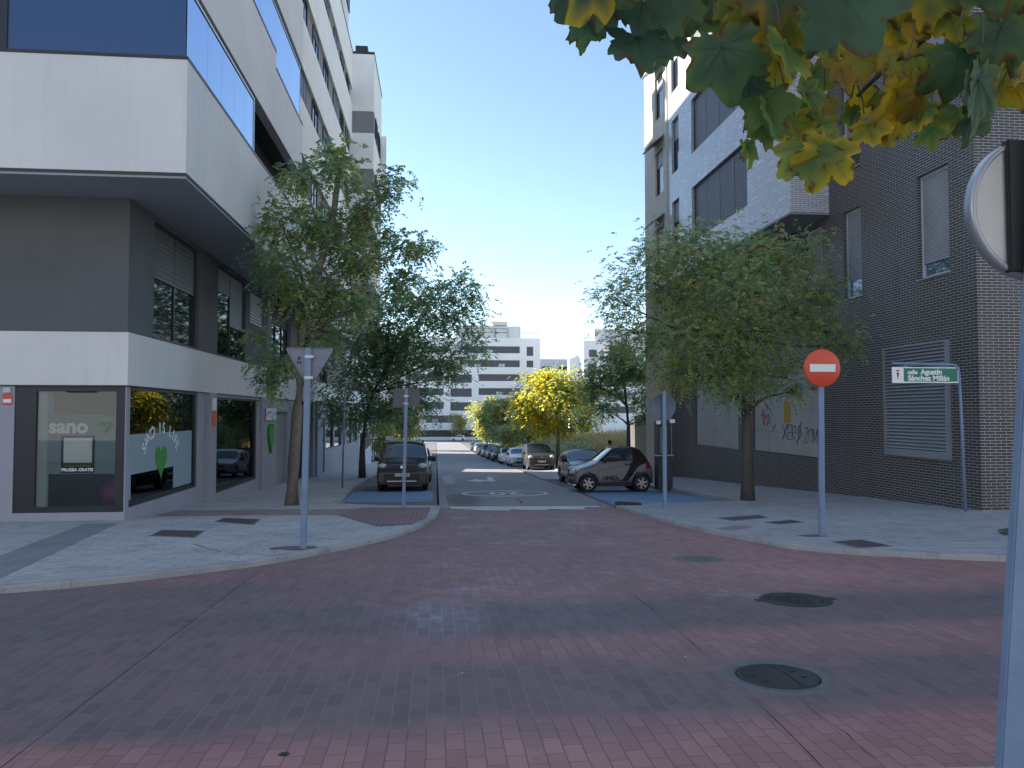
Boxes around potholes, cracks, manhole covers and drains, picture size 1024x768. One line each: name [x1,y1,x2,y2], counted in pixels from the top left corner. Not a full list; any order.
utility cover [831,540,891,548]
crack [762,705,872,761]
manhole cover [722,660,836,695]
manhole cover [673,555,723,563]
manhole cover [754,592,837,608]
utility cover [150,530,204,538]
